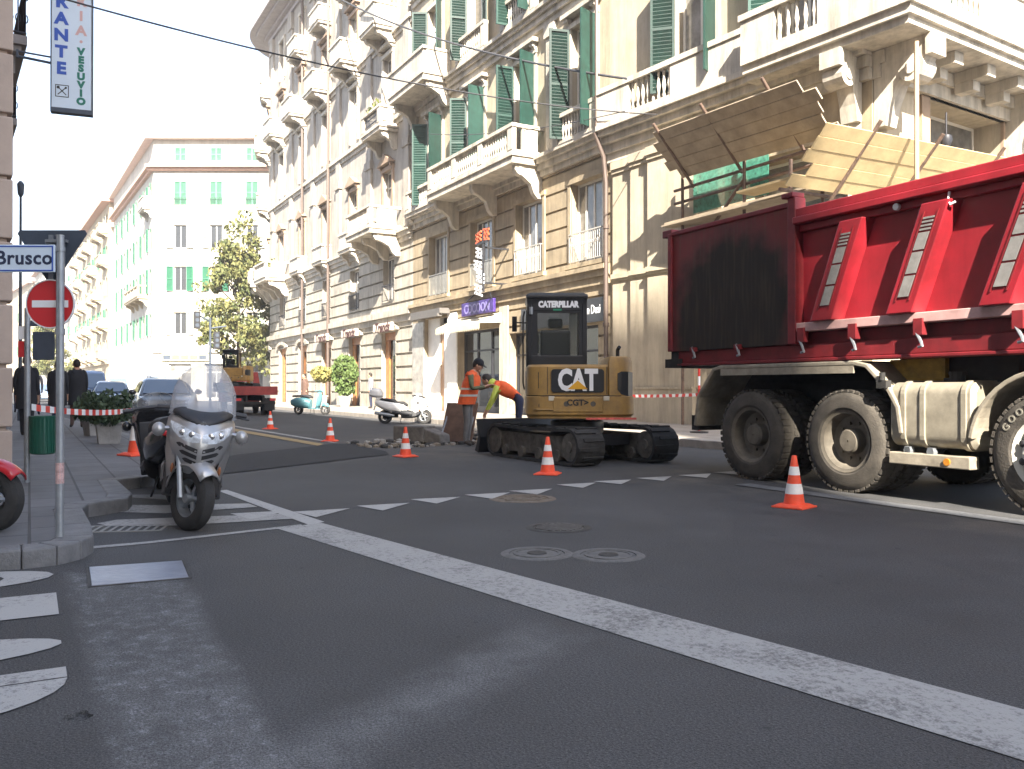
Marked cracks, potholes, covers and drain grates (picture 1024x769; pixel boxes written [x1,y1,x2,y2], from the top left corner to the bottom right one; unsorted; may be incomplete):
manhole cover [489,494,556,503]
manhole cover [501,546,573,561]
utility cover [86,560,192,588]
pothole [346,438,477,448]
drain grate [91,524,169,533]
manhole cover [572,548,645,563]
manhole cover [526,522,592,533]
